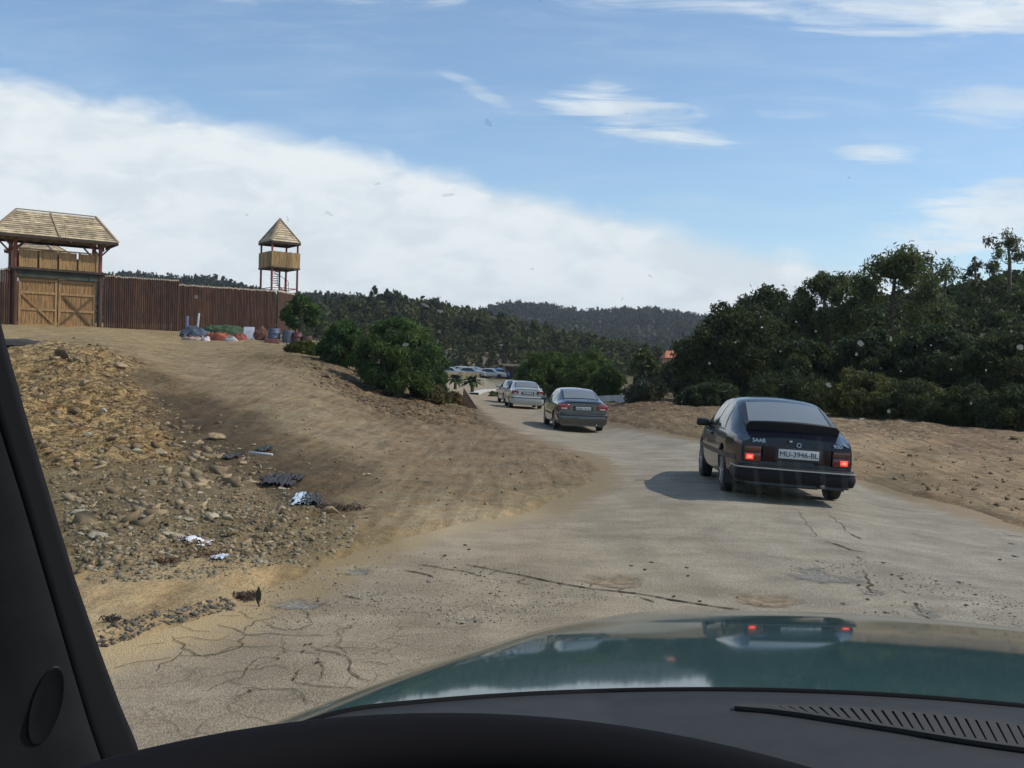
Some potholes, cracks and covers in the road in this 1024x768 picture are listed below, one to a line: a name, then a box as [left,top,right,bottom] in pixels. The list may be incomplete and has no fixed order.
crack [801,513,878,596]
crack [115,612,387,710]
